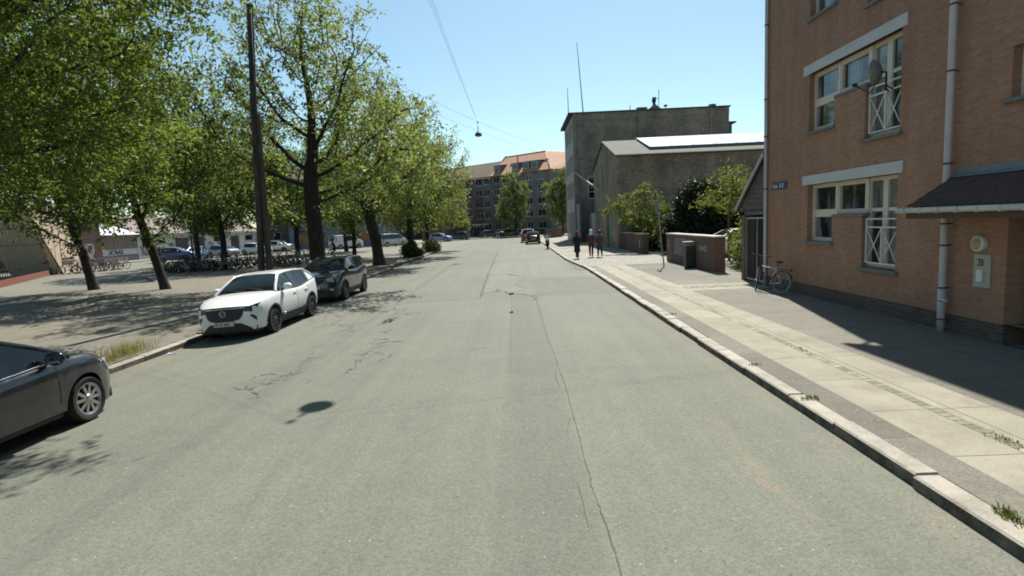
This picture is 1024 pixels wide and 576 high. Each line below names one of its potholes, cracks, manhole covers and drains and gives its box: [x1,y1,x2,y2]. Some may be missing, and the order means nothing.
crack [234,309,414,399]
